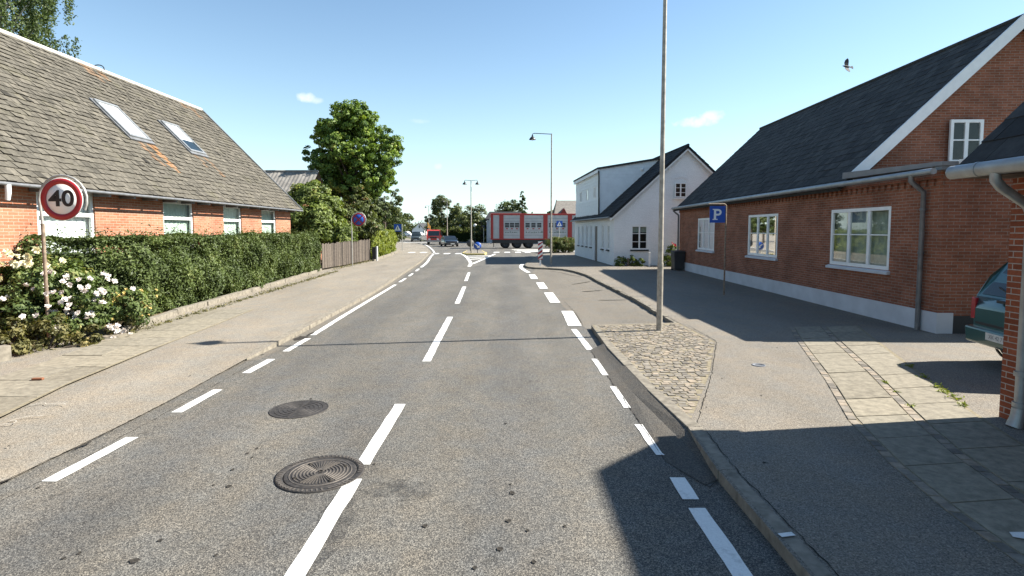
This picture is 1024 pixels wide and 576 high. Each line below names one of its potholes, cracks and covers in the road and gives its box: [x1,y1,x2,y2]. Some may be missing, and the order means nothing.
manhole cover [269,400,329,419]
manhole cover [274,455,365,493]
